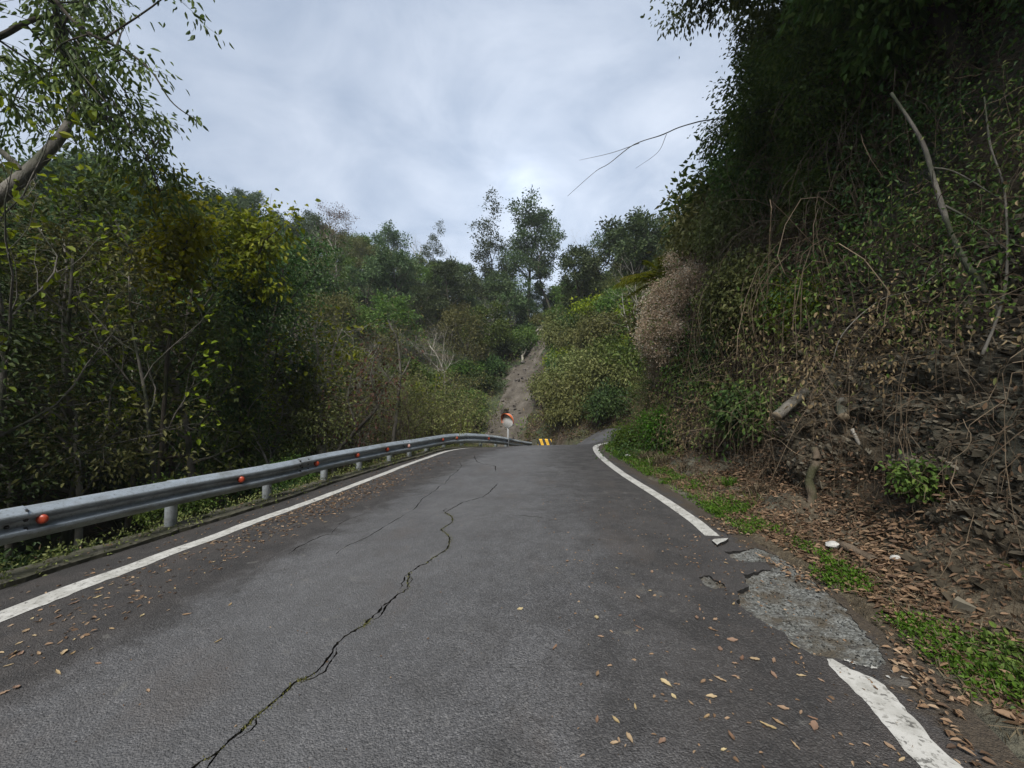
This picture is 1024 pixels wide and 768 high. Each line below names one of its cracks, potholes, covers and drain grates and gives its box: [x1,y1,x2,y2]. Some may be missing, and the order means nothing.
pothole [699,575,725,589]
crack [191,457,498,768]
pothole [724,548,885,667]
